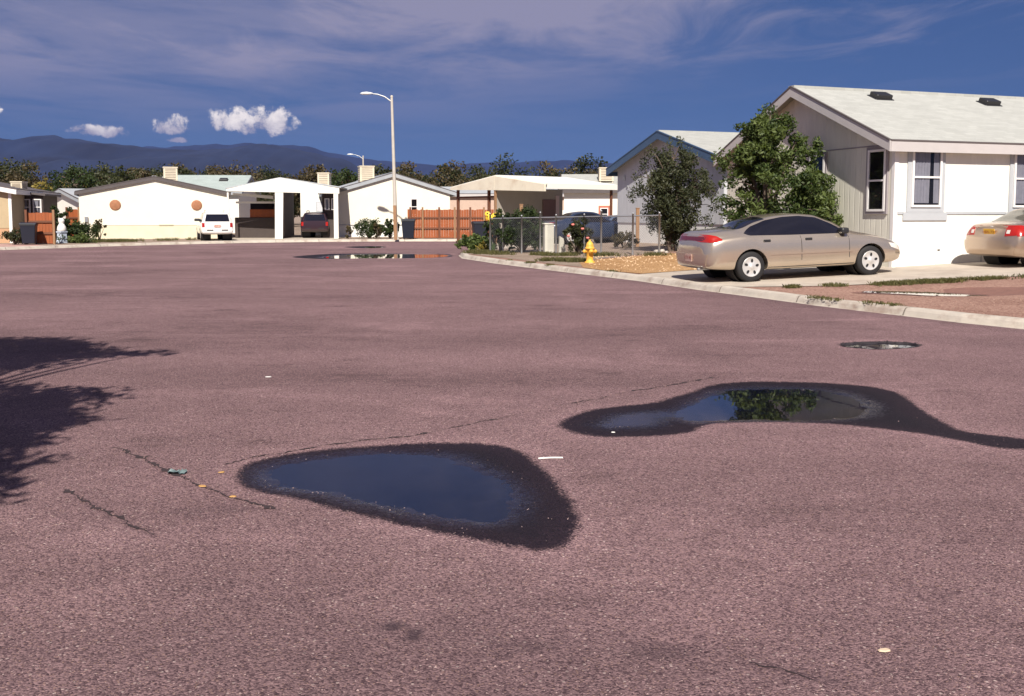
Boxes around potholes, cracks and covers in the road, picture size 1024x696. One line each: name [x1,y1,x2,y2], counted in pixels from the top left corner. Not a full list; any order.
crack [63,489,158,534]
crack [755,662,821,682]
crack [112,447,276,511]
